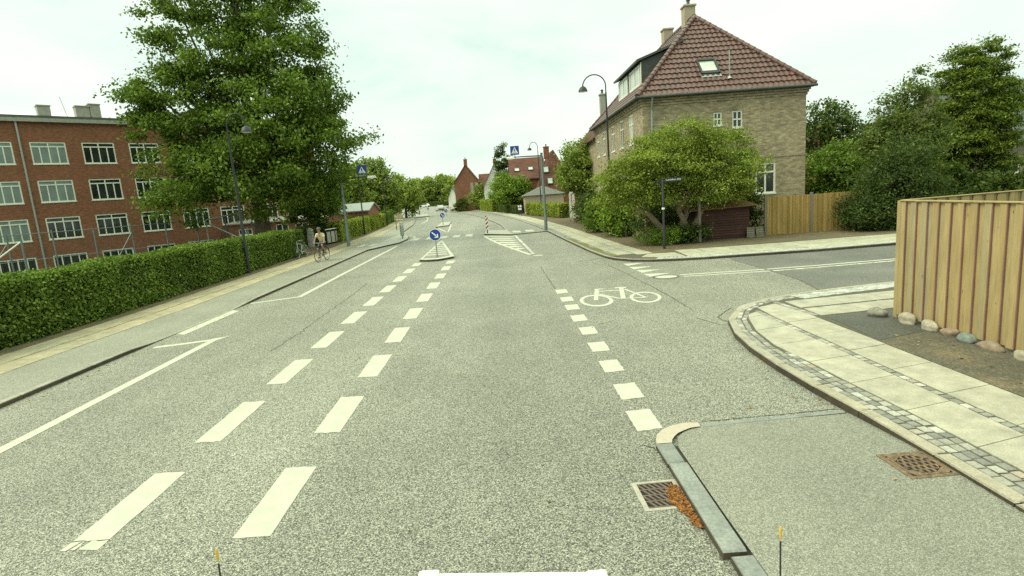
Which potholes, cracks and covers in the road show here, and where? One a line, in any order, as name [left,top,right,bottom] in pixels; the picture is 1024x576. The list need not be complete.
drain grate [876,451,961,479]
drain grate [631,479,688,512]
crack [270,283,367,351]
